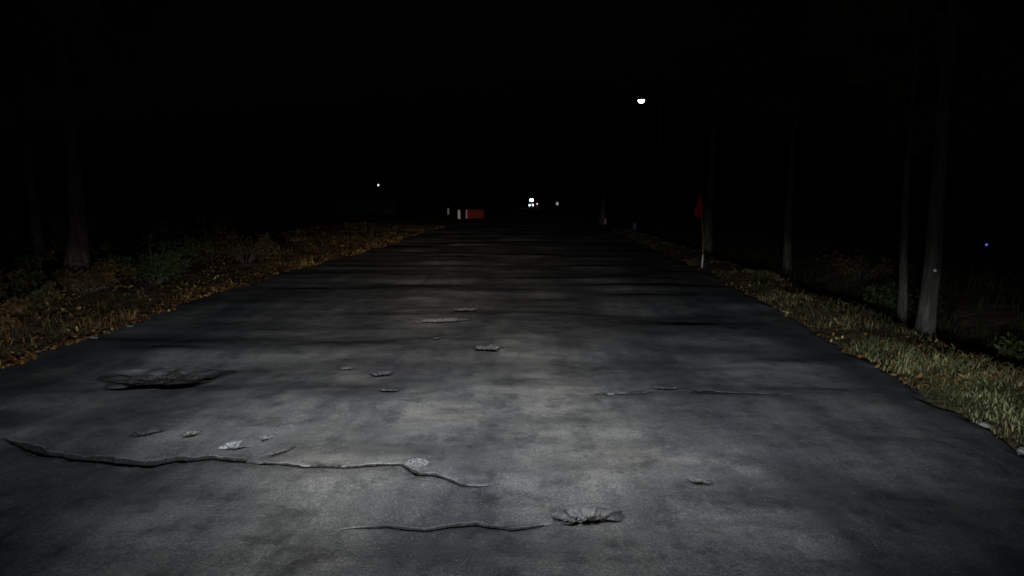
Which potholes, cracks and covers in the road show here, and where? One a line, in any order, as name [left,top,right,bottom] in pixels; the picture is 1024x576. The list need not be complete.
pothole [469,343,509,353]
crack [340,517,557,537]
pothole [363,369,399,379]
crack [575,389,657,397]
pothole [540,502,635,531]
crack [0,434,502,491]
pothole [119,425,173,440]
pothole [678,473,722,489]
pothole [91,363,243,392]
